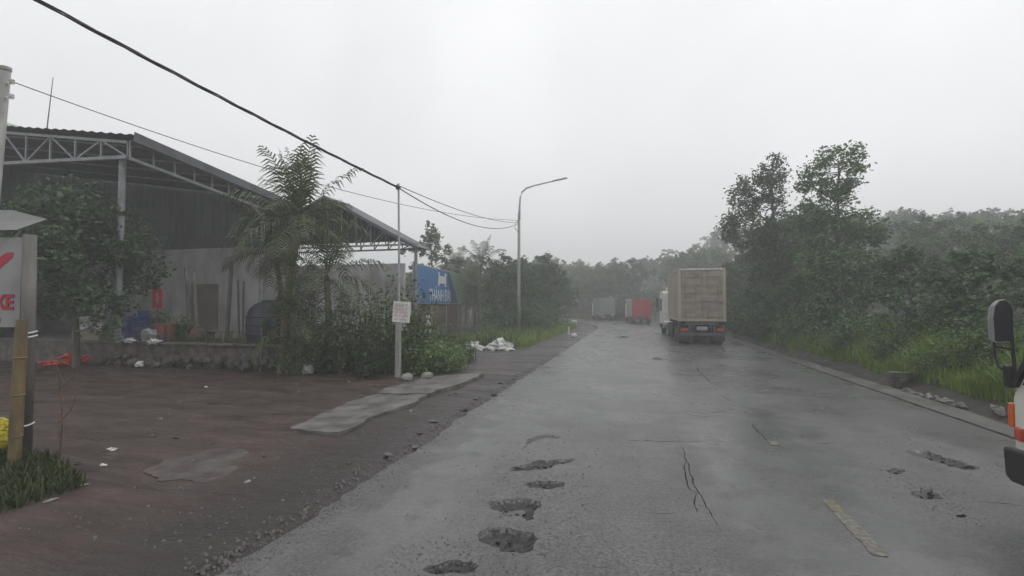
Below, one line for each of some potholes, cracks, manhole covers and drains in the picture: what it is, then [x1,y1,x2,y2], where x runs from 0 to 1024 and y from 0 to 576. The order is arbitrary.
crack [630,440,718,526]
pothole [522,434,562,449]
pothole [524,480,565,489]
pothole [422,560,480,575]
pothole [484,498,542,521]
pothole [477,527,539,553]
pothole [507,459,575,471]
pothole [910,487,943,500]
crack [671,344,734,416]
pothole [907,450,980,470]
